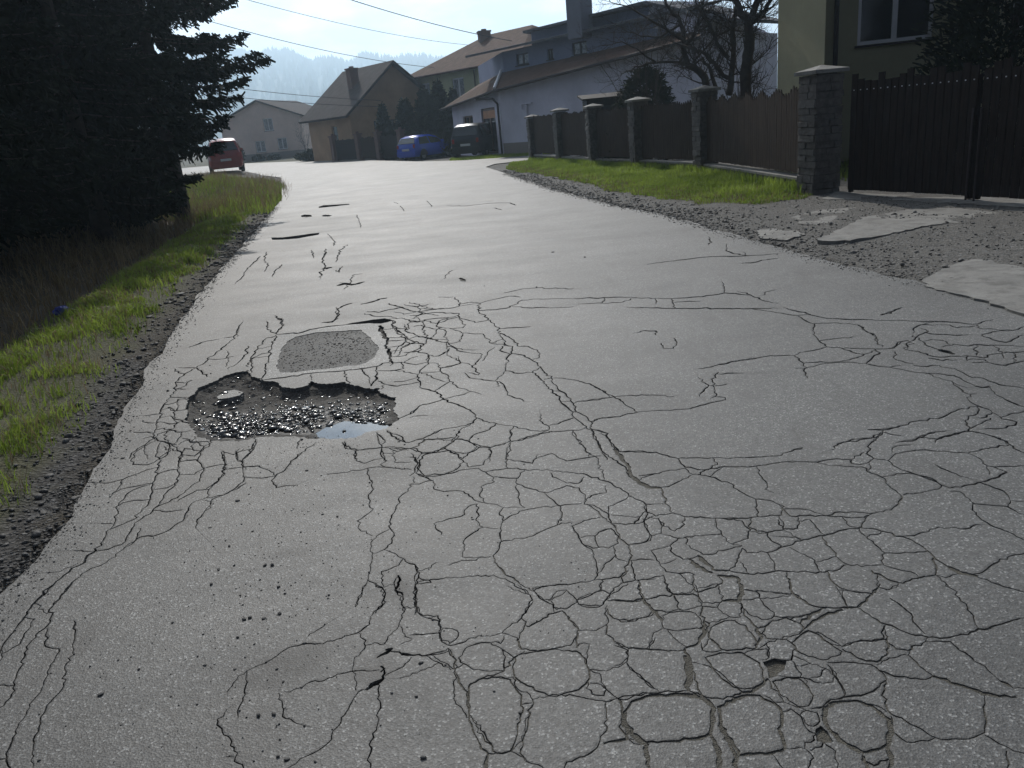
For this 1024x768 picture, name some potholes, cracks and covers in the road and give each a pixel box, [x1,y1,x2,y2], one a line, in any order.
crack [0,235,1024,768]
pothole [184,370,399,442]
